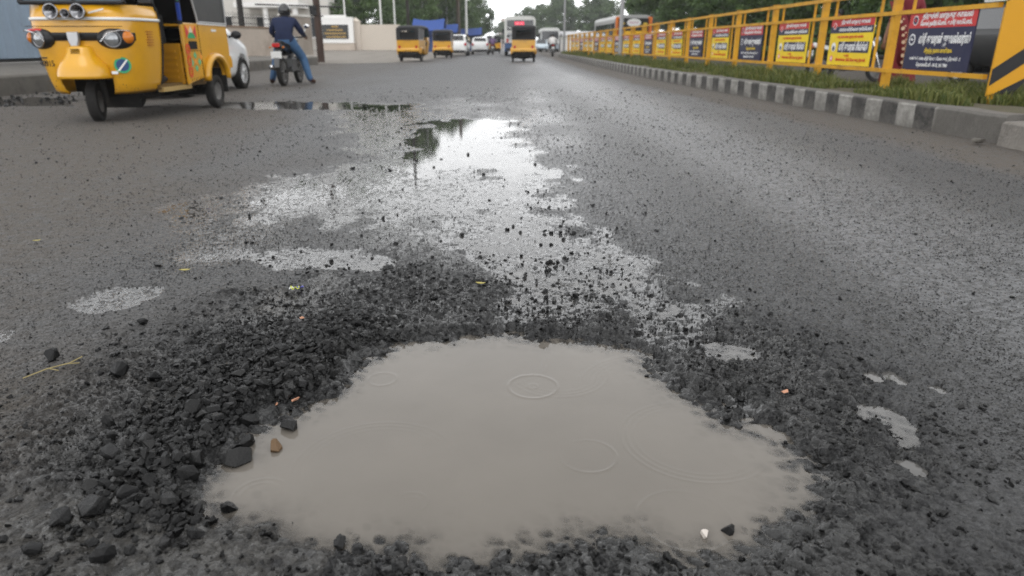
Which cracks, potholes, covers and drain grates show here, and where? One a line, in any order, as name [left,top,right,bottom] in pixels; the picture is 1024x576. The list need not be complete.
pothole [163,323,856,576]
